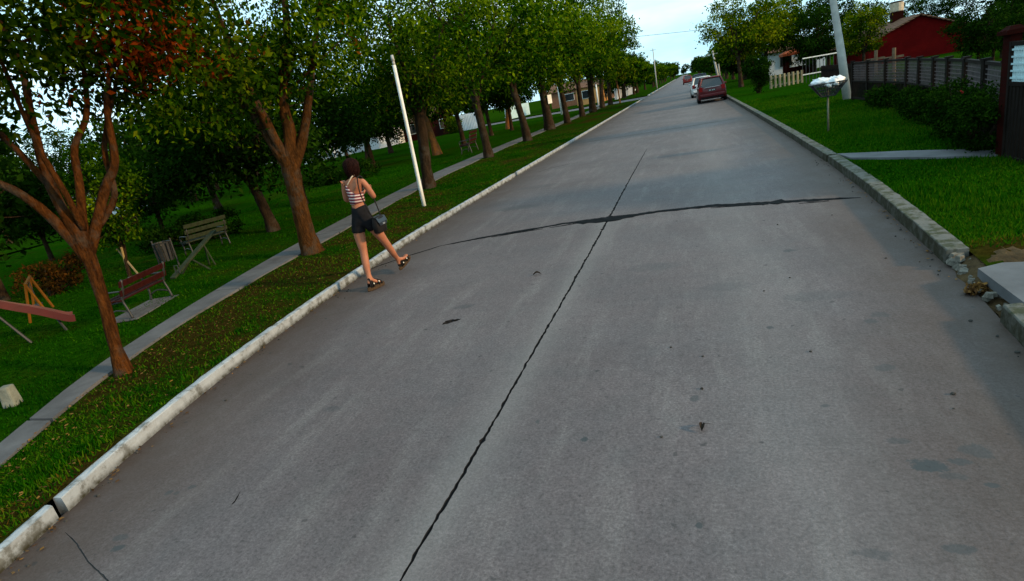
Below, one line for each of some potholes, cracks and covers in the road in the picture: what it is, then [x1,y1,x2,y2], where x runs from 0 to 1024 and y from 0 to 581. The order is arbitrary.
crack [65,532,109,581]
crack [400,151,646,581]
